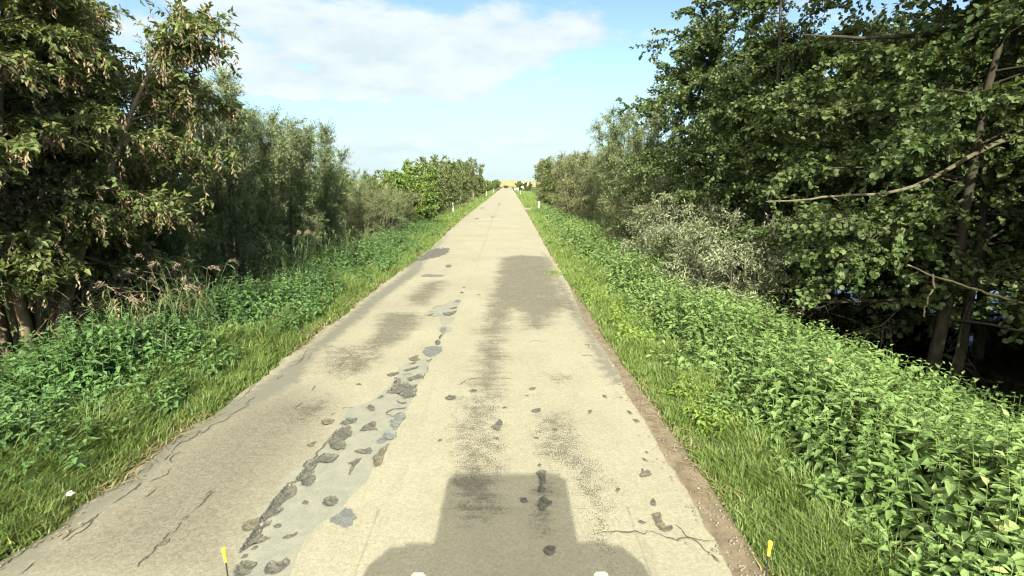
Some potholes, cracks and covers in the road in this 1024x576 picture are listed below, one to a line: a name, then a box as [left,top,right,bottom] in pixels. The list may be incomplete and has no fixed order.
crack [592,526,717,559]
pothole [537,496,552,510]
pothole [292,453,339,486]
pothole [372,444,389,467]
pothole [239,482,297,553]
crack [137,491,215,567]
pothole [386,377,418,399]
pothole [327,425,352,450]
pothole [651,512,667,532]
pothole [536,469,547,492]
